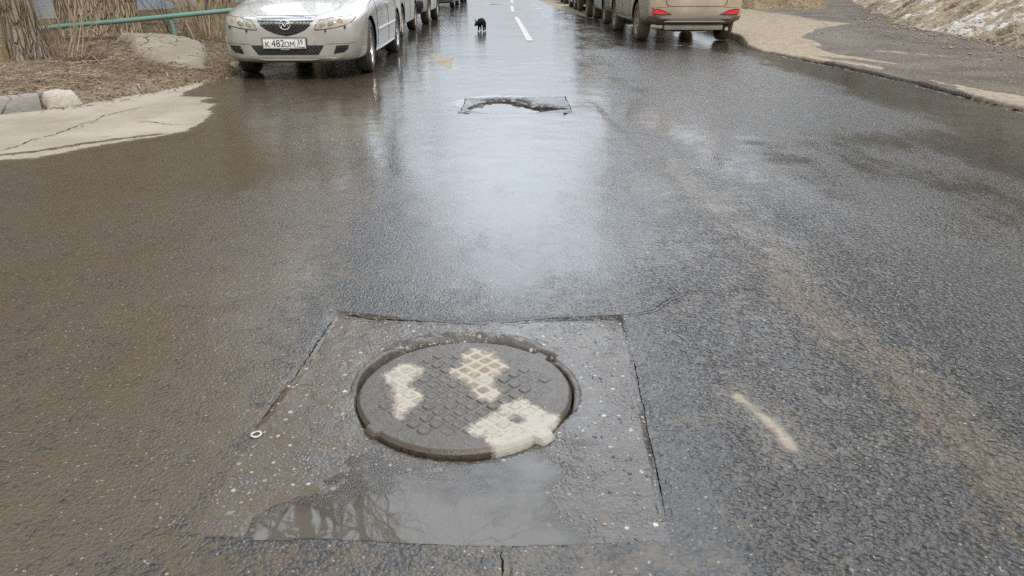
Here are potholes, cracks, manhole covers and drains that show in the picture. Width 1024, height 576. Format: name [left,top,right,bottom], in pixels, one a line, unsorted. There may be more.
crack [493,546,511,576]
manhole cover [350,343,581,461]
